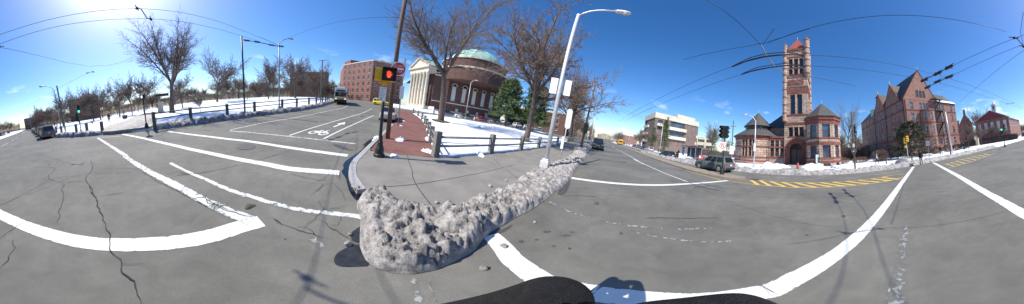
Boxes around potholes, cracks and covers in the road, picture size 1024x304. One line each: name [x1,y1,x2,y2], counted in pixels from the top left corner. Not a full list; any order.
crack [6,147,142,304]
